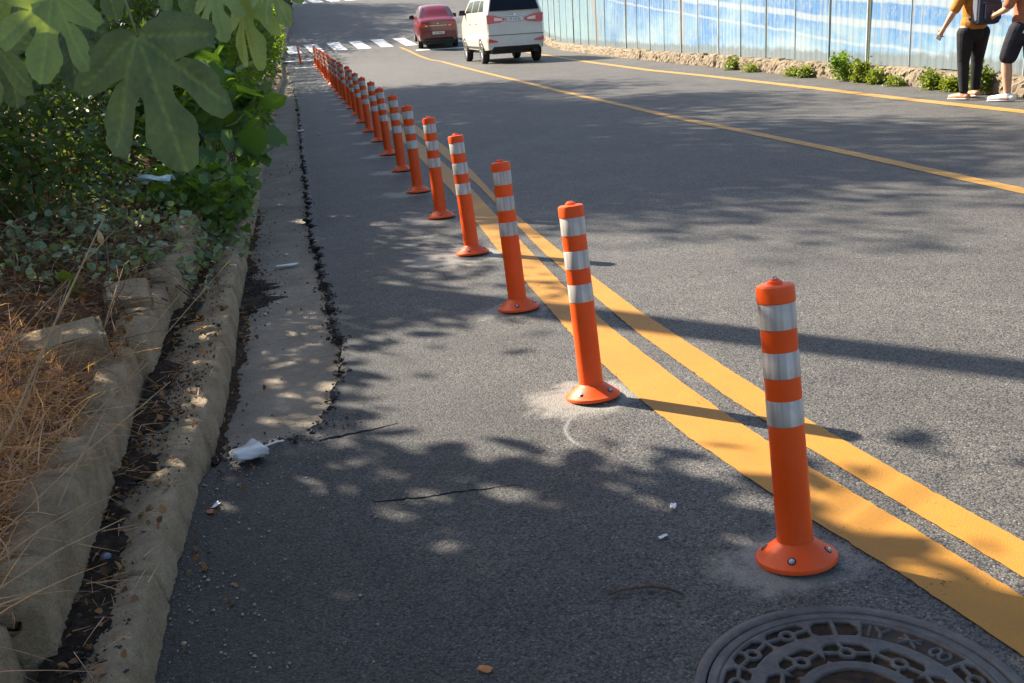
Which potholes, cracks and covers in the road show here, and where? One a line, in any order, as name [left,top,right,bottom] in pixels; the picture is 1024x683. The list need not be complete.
crack [319,423,398,442]
manhole cover [693,606,1024,683]
crack [373,484,521,502]
